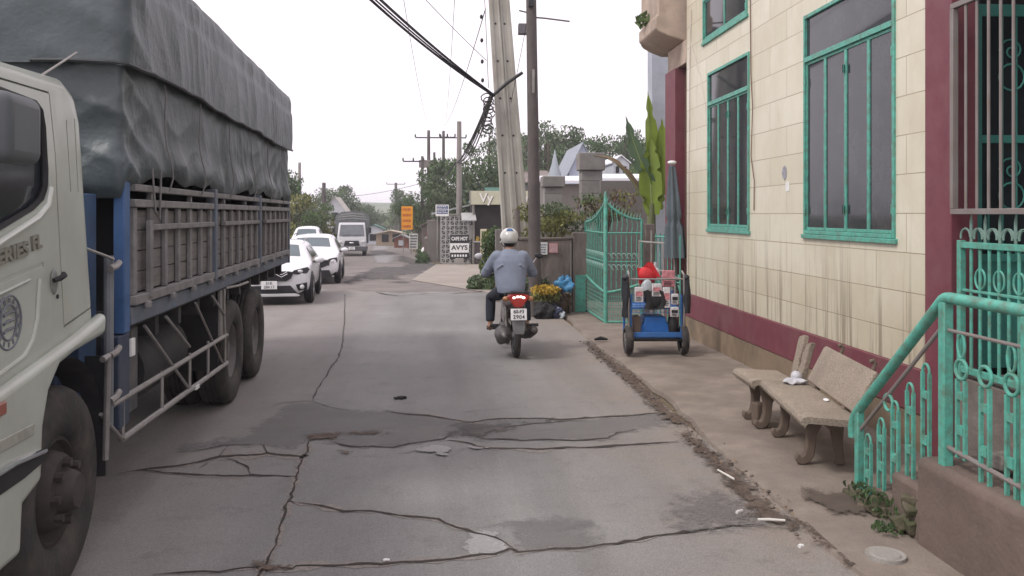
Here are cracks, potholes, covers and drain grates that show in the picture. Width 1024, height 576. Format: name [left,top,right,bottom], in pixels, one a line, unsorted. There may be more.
crack [155,501,763,575]
crack [333,408,678,460]
manhole cover [864,546,907,565]
crack [119,436,309,478]
